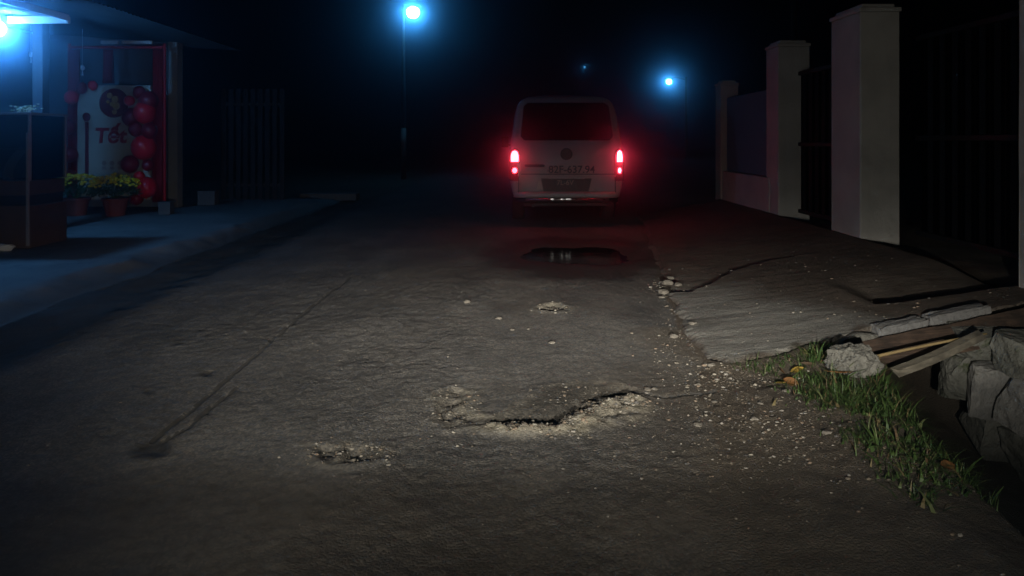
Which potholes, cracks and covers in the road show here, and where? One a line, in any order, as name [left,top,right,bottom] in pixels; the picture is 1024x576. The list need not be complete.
pothole [534,302,570,311]
crack [640,389,717,399]
pothole [492,380,642,424]
crack [672,252,819,293]
pothole [312,440,390,465]
